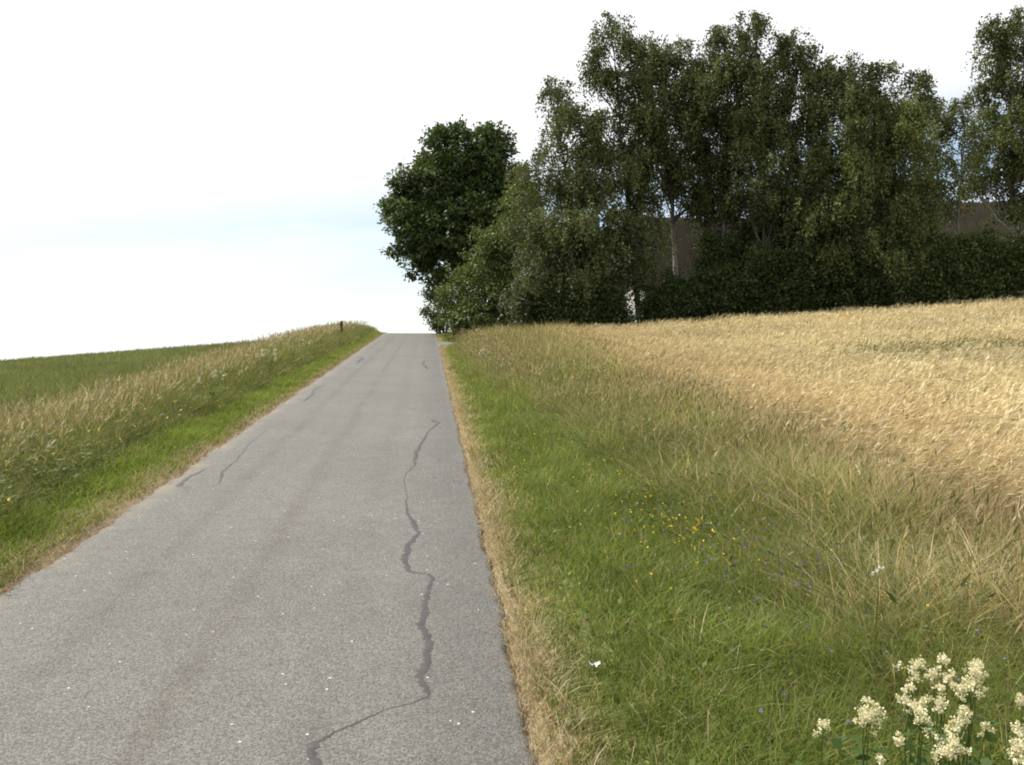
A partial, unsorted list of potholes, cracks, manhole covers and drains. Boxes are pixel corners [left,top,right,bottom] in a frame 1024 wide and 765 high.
crack [306,420,440,765]
crack [176,429,268,488]
